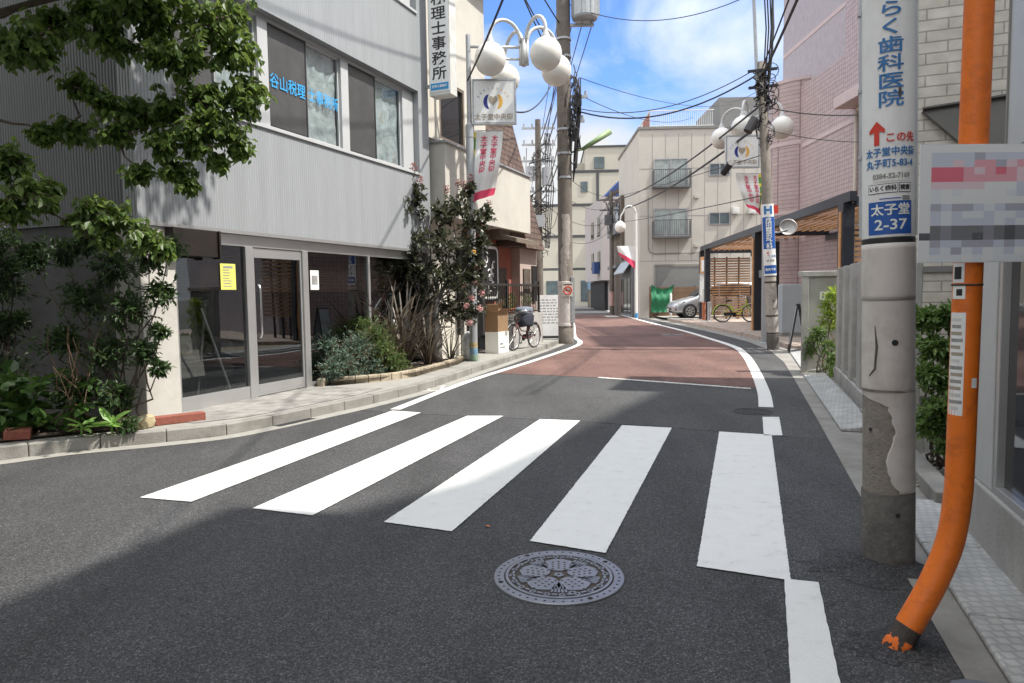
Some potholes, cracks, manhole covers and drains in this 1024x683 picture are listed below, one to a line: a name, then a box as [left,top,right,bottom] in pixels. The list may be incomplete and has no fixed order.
manhole cover [494,551,625,606]
